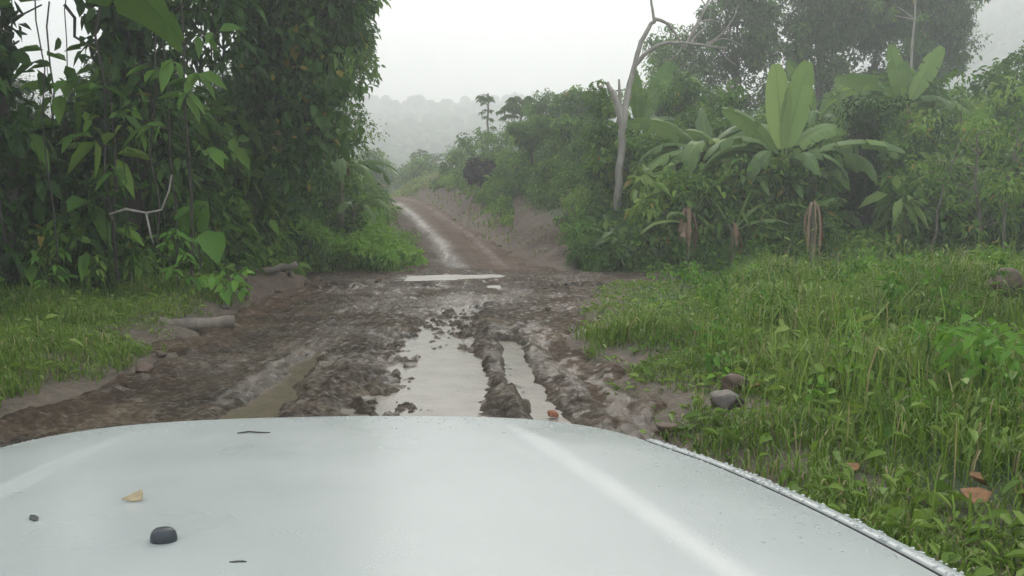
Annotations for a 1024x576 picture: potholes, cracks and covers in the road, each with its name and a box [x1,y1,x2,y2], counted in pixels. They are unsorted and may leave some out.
pothole [490,330,594,427]
pothole [195,338,338,421]
pothole [300,300,528,419]
pothole [398,273,511,282]
